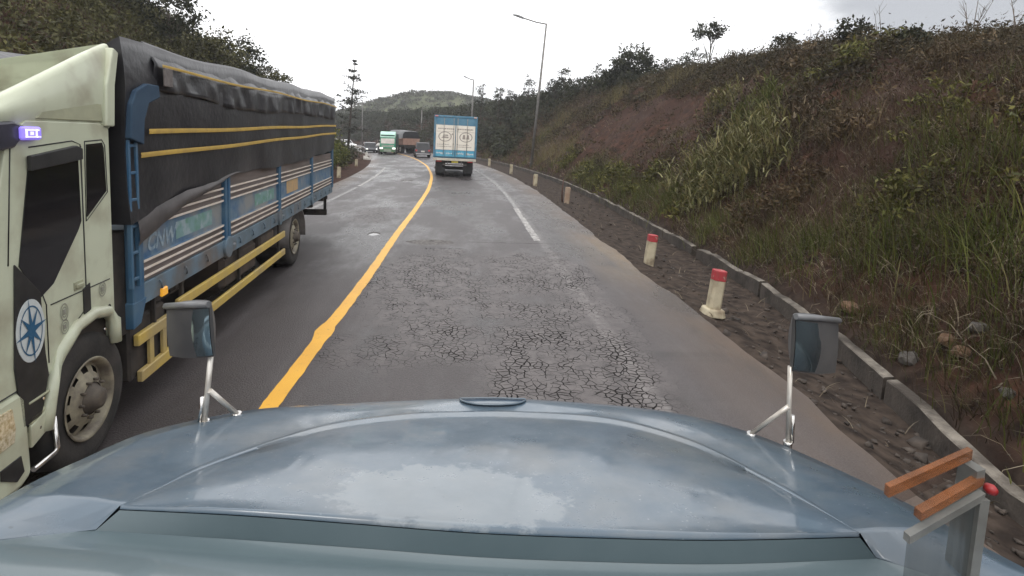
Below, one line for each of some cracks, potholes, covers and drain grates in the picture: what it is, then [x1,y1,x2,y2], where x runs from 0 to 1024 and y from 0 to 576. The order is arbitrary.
crack [311,242,699,413]
